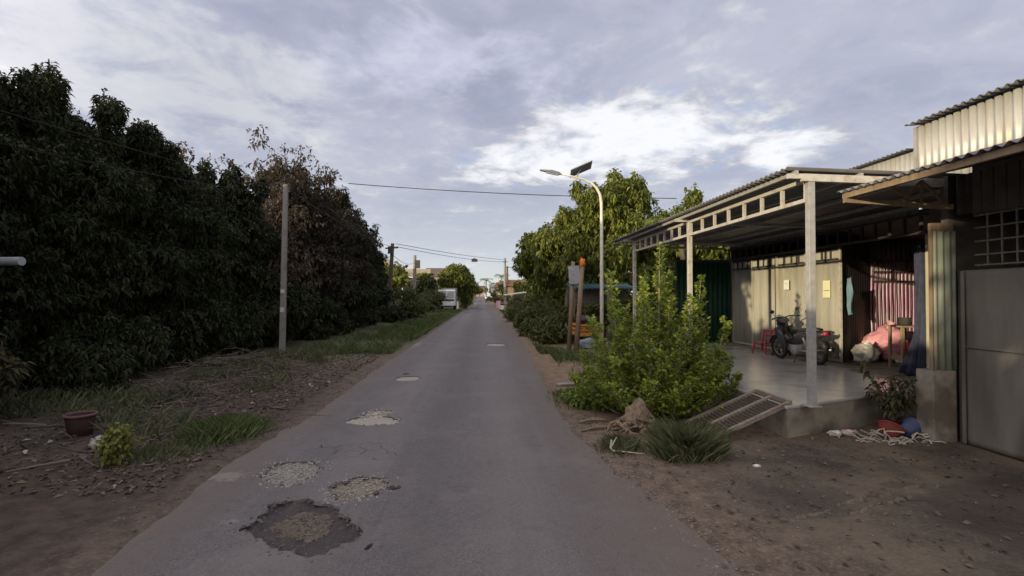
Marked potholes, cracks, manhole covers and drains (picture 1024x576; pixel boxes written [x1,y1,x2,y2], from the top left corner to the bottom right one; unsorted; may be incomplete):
drain grate [683,389,792,431]
pothole [319,472,399,505]
pothole [244,458,333,490]
pothole [228,496,365,563]
pothole [345,408,402,426]
